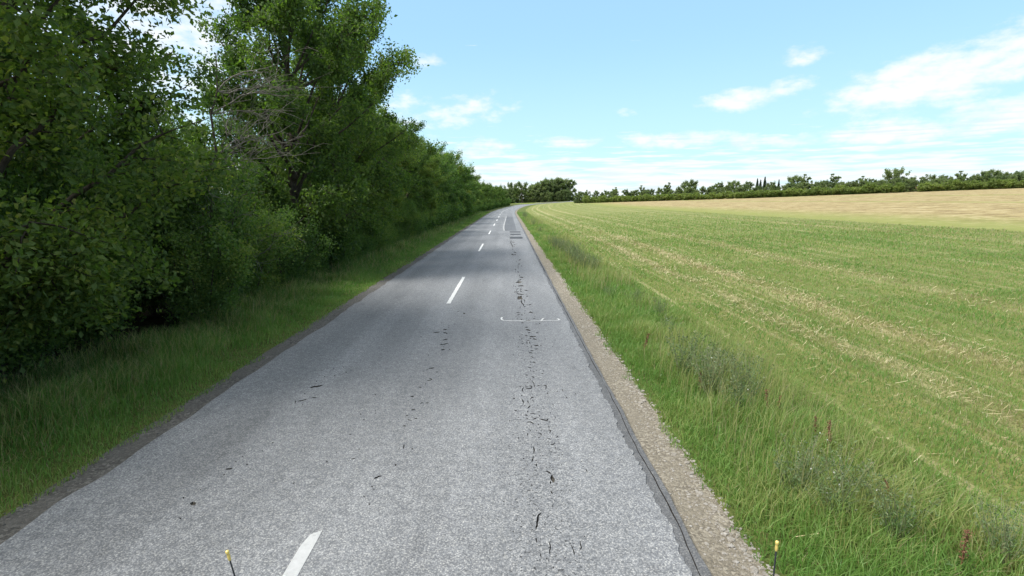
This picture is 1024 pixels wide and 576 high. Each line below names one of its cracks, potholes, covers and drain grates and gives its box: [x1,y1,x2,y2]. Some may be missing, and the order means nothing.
crack [503,241,701,576]
